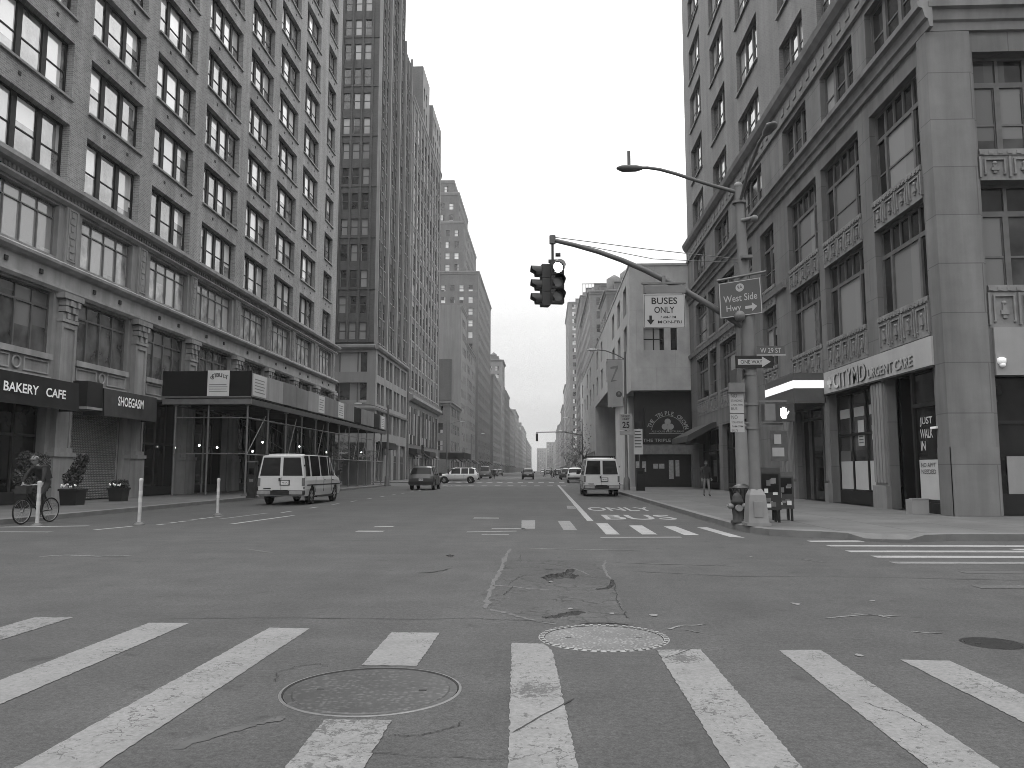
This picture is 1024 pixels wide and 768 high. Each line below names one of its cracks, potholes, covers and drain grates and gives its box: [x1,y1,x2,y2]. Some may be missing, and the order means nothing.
pothole [542,610,586,619]
manhole cover [959,637,1024,650]
manhole cover [539,624,670,652]
crack [513,698,574,732]
manhole cover [278,667,462,717]
crack [556,584,629,625]
pothole [541,569,579,583]
